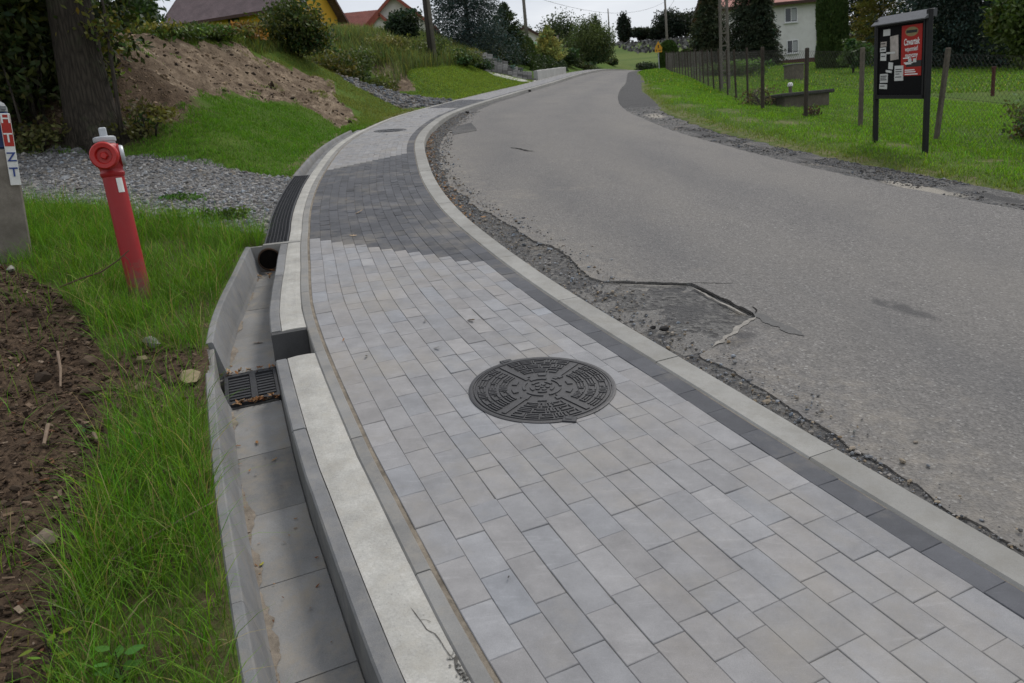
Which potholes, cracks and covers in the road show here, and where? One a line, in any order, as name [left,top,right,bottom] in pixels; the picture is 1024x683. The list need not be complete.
manhole cover [469,357,616,424]
crack [411,608,469,683]
